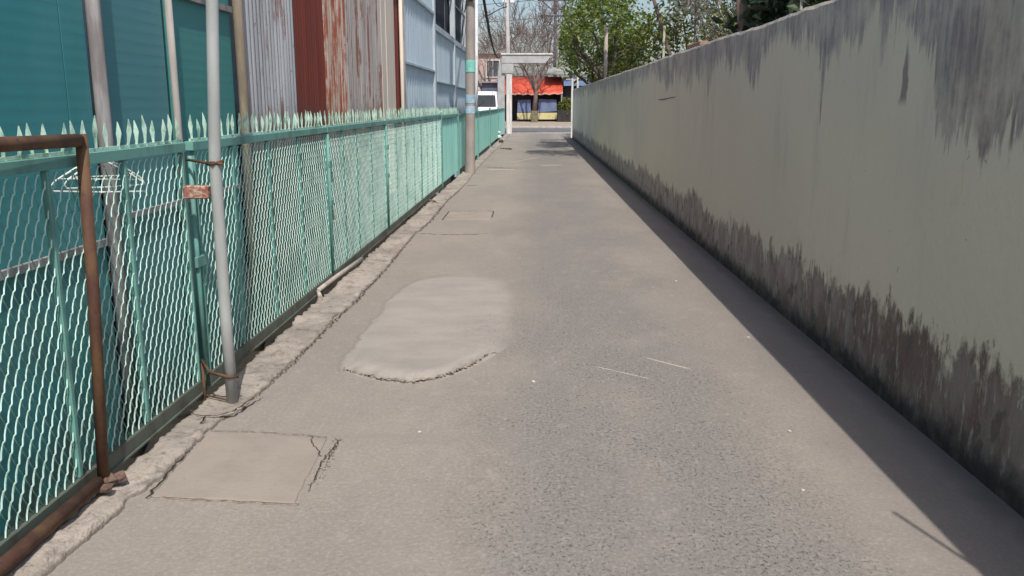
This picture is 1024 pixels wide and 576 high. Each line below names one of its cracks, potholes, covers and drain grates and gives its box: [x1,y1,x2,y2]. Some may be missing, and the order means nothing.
crack [308,437,344,492]
